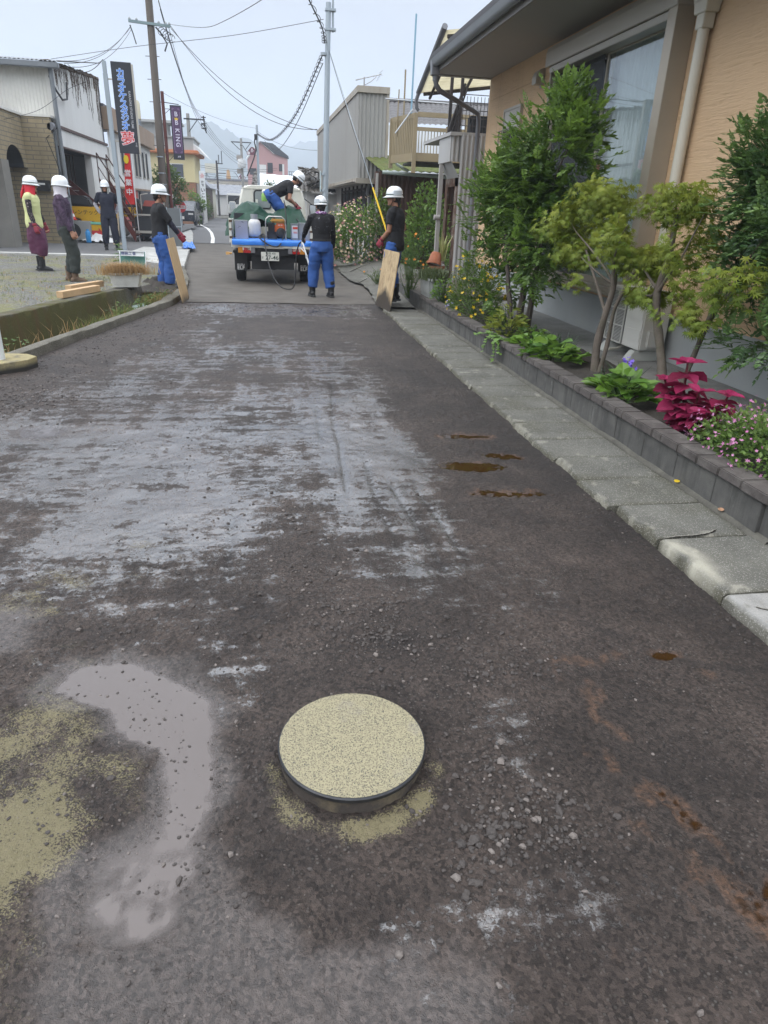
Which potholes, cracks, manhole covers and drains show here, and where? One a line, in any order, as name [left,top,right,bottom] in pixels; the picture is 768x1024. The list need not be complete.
manhole cover [278,693,426,814]
crack [664,529,717,539]
